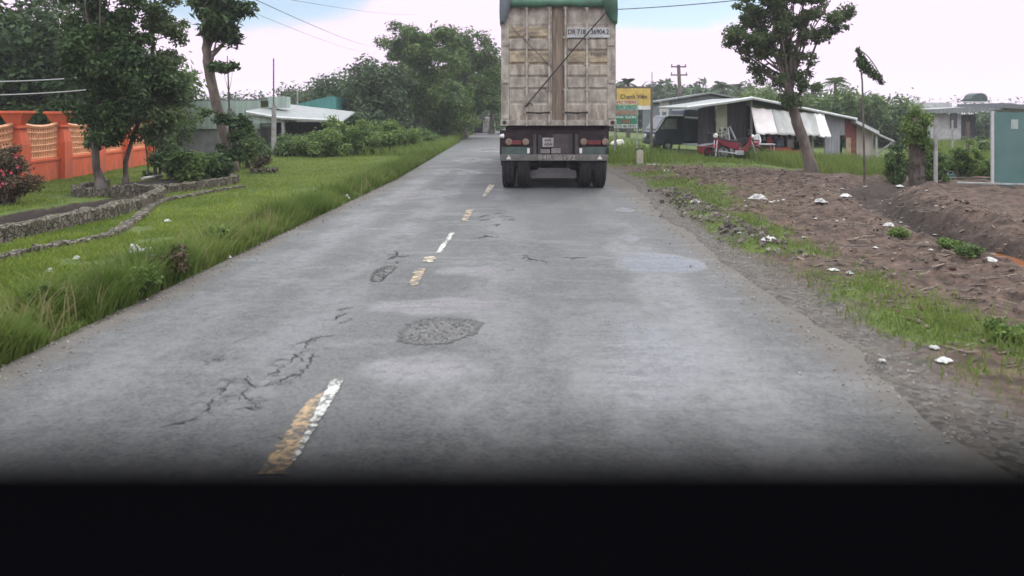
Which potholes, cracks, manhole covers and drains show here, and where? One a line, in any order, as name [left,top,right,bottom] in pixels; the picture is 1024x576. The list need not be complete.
crack [162,334,335,427]
pothole [370,265,398,282]
